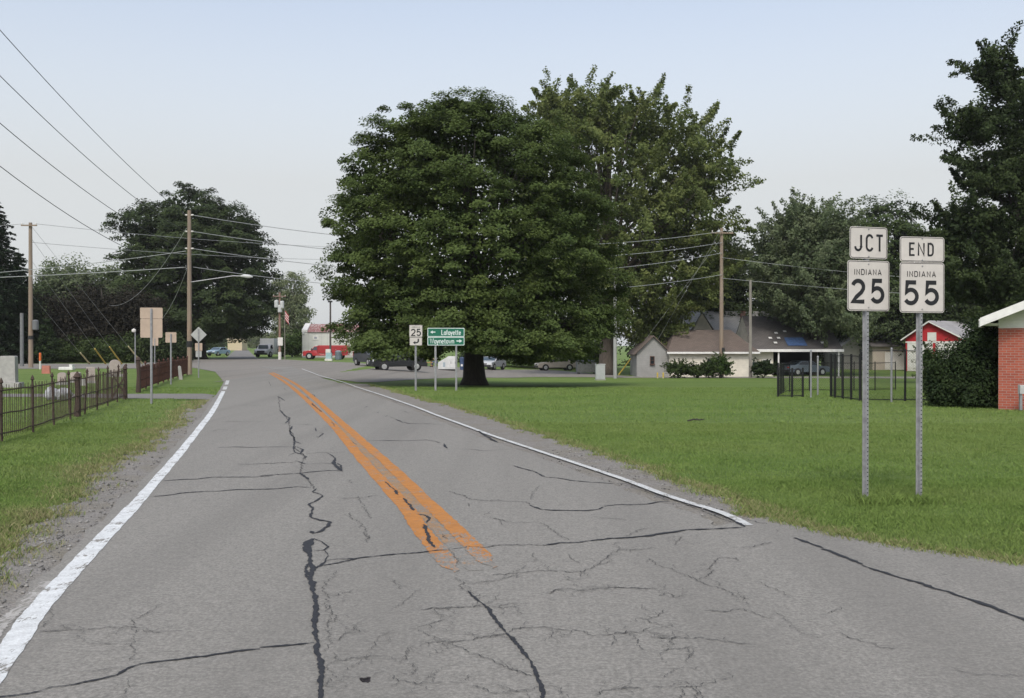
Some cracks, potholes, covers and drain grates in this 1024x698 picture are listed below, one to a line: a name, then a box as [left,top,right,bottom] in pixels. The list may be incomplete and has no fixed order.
crack [218,405,376,543]
crack [18,602,182,696]
crack [493,519,1022,698]
crack [378,577,639,698]
